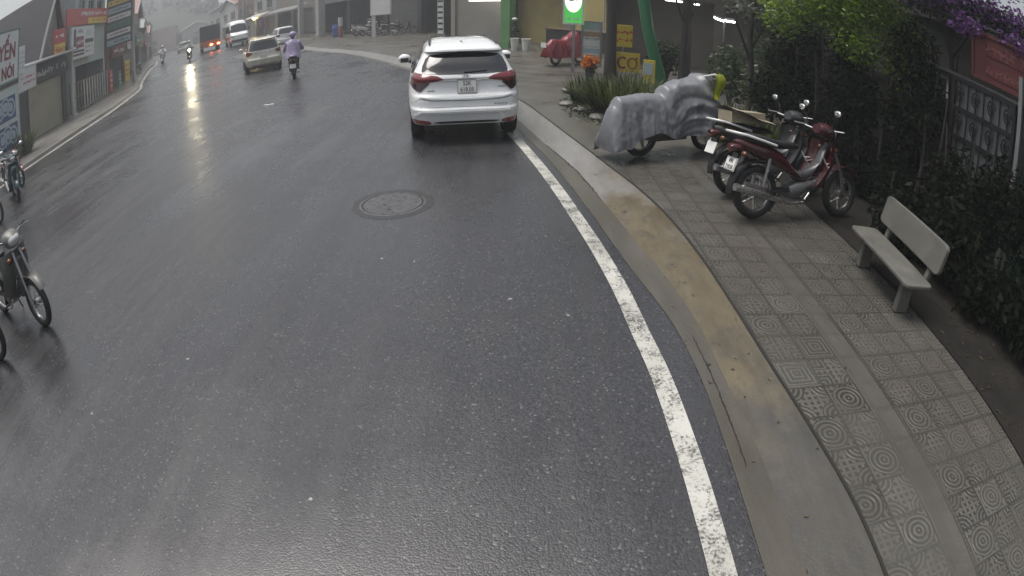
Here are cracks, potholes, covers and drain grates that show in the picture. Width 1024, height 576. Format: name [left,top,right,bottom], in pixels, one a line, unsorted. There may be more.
crack [693,337,746,465]
manhole cover [352,190,434,220]
